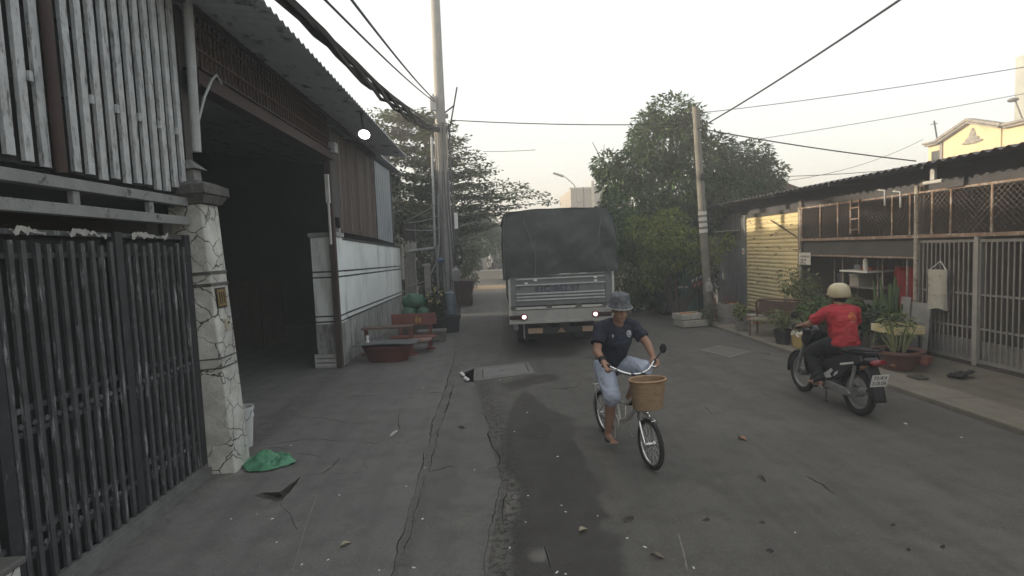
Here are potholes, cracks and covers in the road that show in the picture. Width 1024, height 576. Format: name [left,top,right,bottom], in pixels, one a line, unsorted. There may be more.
manhole cover [700,345,750,358]
manhole cover [477,362,535,381]
crack [484,416,508,574]
pothole [255,476,301,502]
crack [264,437,378,475]
crack [333,363,485,551]
